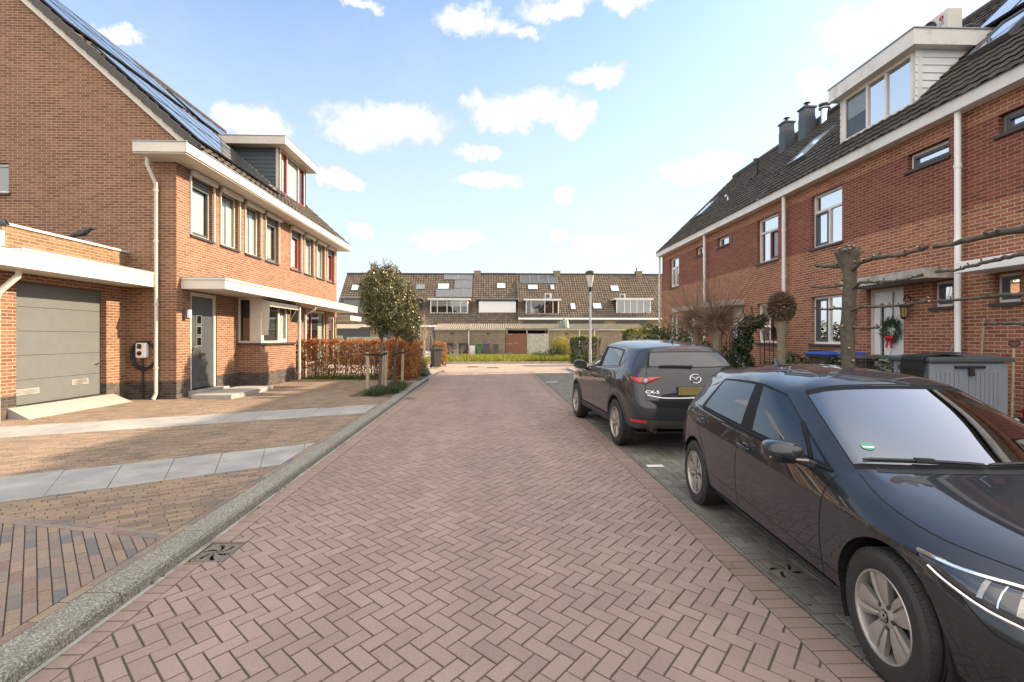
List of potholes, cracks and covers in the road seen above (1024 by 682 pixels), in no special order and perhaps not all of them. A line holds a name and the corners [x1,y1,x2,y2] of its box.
drain grate [757,560,817,581]
drain grate [187,542,246,562]
